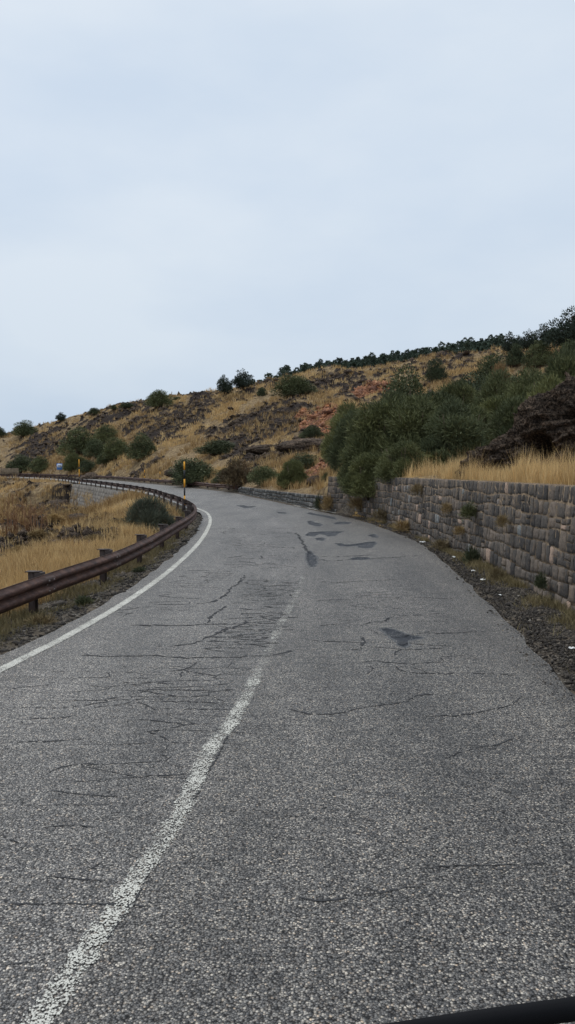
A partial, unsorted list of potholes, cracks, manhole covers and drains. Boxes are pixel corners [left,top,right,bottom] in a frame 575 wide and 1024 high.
crack [439,696,522,716]
crack [420,862,546,870]
crack [3,527,509,907]
